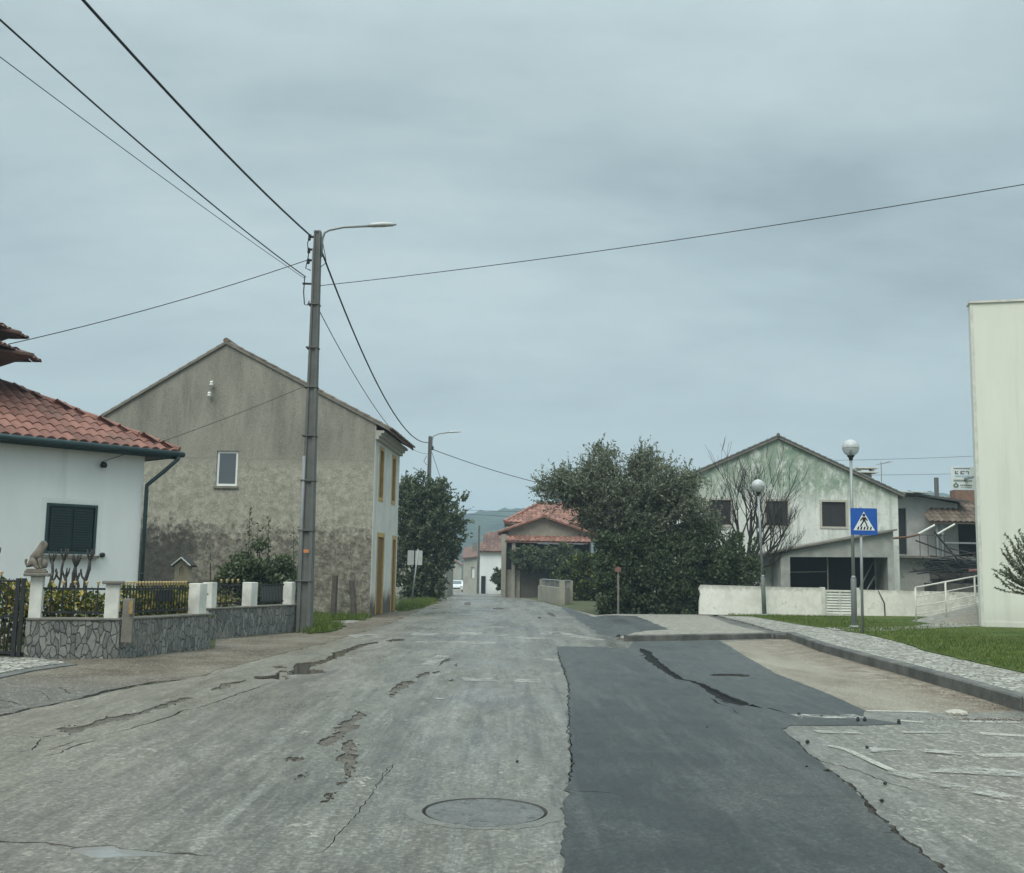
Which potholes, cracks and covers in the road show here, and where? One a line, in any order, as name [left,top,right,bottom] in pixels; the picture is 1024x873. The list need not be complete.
crack [640,650,745,706]
manhole cover [404,796,565,830]
pothole [317,710,365,747]
pothole [287,643,375,675]
pothole [336,741,360,778]
pothole [255,671,288,680]
